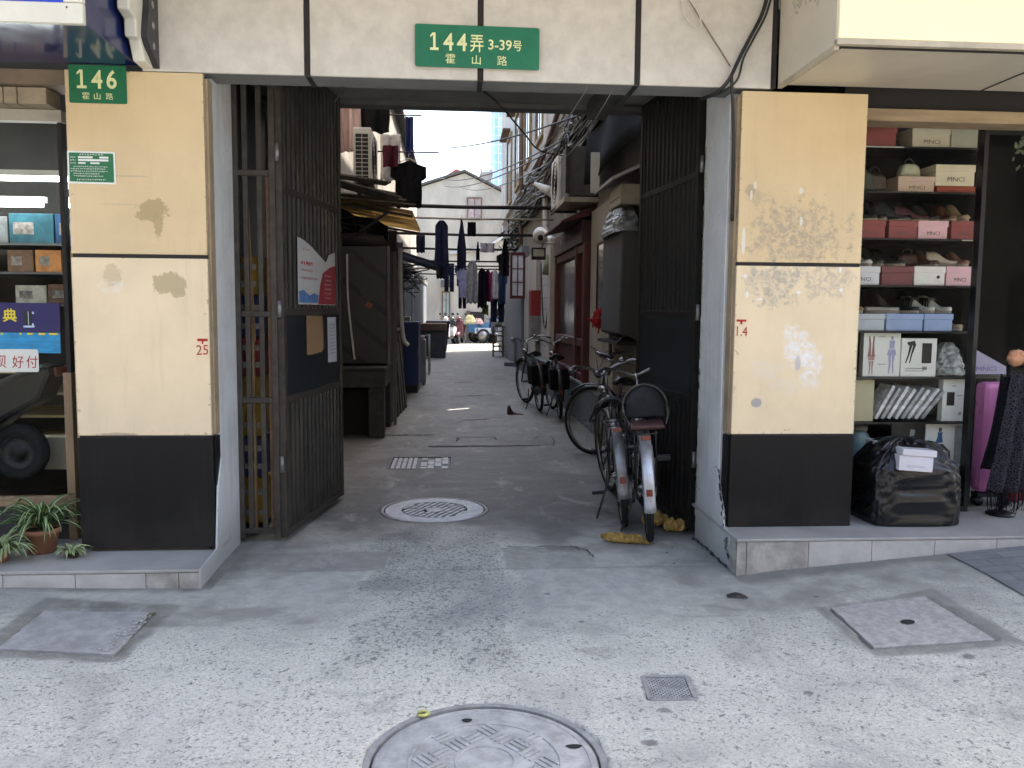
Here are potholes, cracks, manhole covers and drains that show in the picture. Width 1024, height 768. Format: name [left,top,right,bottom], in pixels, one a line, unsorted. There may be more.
manhole cover [362,703,608,768]
manhole cover [381,497,488,523]
utility cover [0,611,156,657]
drain grate [640,675,698,701]
utility cover [831,596,995,649]
